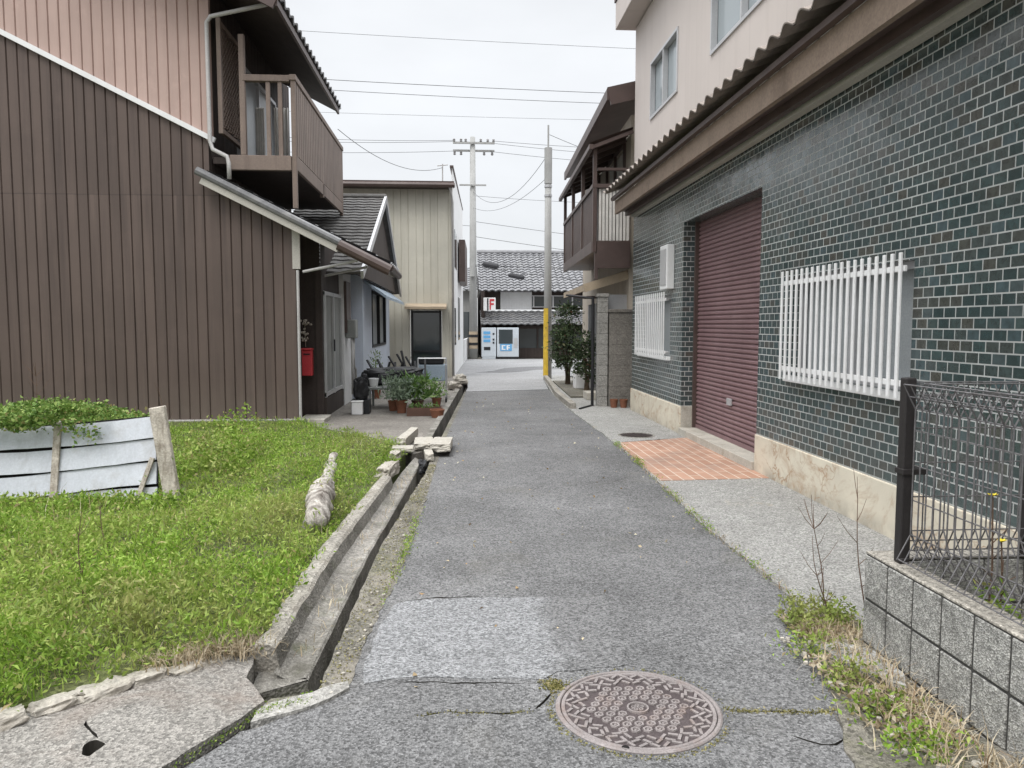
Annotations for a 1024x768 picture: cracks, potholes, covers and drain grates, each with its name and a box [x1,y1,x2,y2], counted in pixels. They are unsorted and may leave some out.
crack [791,735,843,746]
manhole cover [556,671,723,755]
crack [84,721,98,738]
crack [381,681,552,716]
